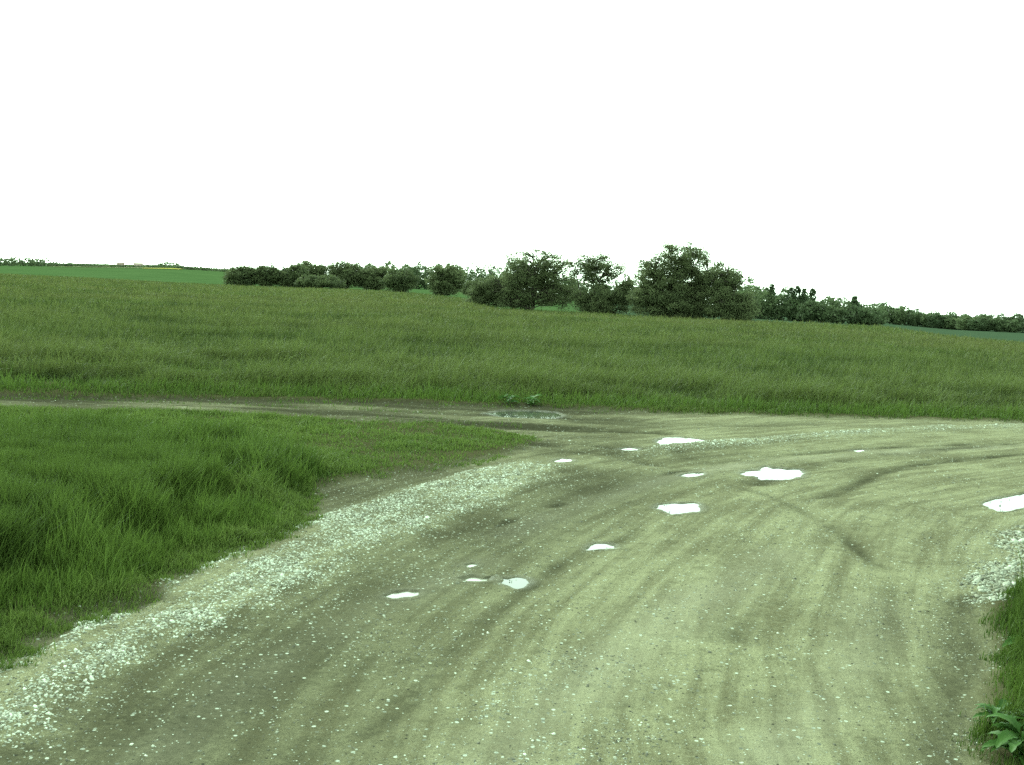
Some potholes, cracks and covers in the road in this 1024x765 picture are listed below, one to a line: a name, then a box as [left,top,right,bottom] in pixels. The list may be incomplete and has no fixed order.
pothole [648,501,710,516]
pothole [489,574,541,592]
pothole [580,541,623,552]
pothole [651,436,709,444]
pothole [375,587,428,601]
pothole [449,573,504,584]
pothole [733,465,812,482]
pothole [977,492,1024,513]
pothole [478,409,568,419]
